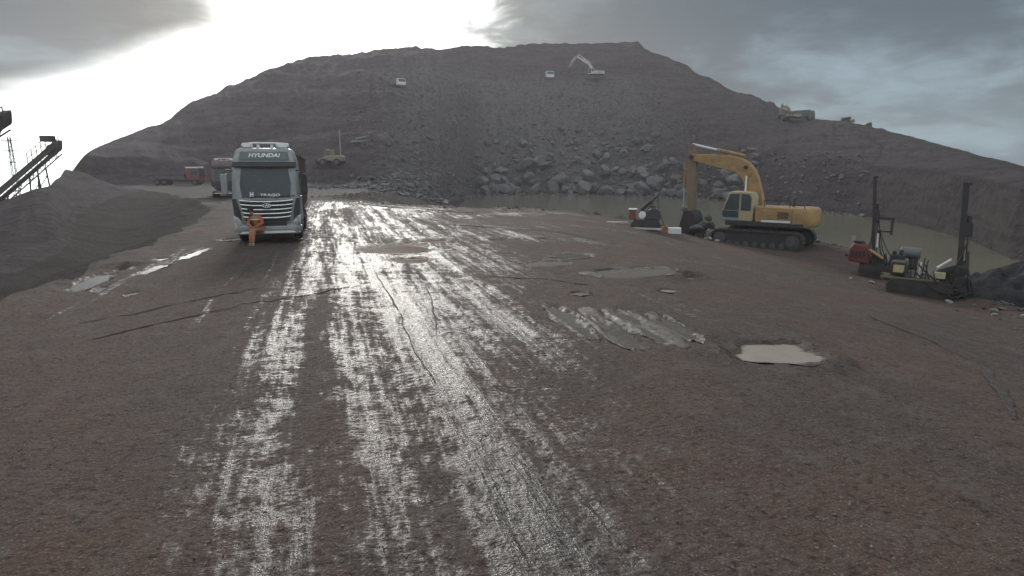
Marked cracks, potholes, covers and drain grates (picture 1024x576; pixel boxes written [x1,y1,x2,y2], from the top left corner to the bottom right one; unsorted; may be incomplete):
pothole [578,307,645,350]
pothole [602,308,690,348]
pothole [645,311,705,344]
crack [868,315,1016,419]
pothole [542,303,598,340]
